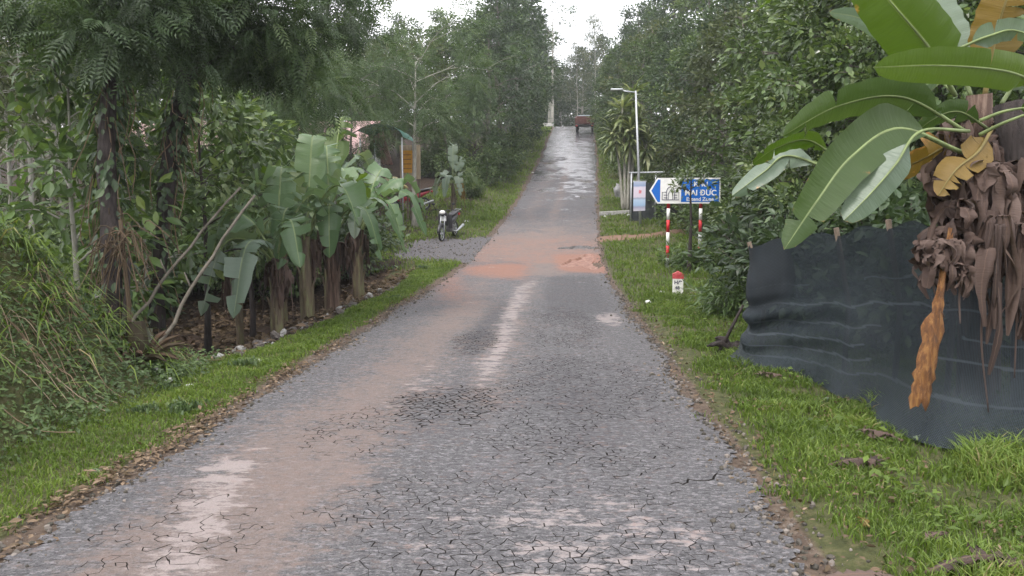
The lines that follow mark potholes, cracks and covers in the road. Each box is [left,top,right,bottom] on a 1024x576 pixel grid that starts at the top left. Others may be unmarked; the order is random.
crack [73,489,274,576]
crack [291,470,771,576]
crack [297,385,499,457]
crack [469,307,683,479]
